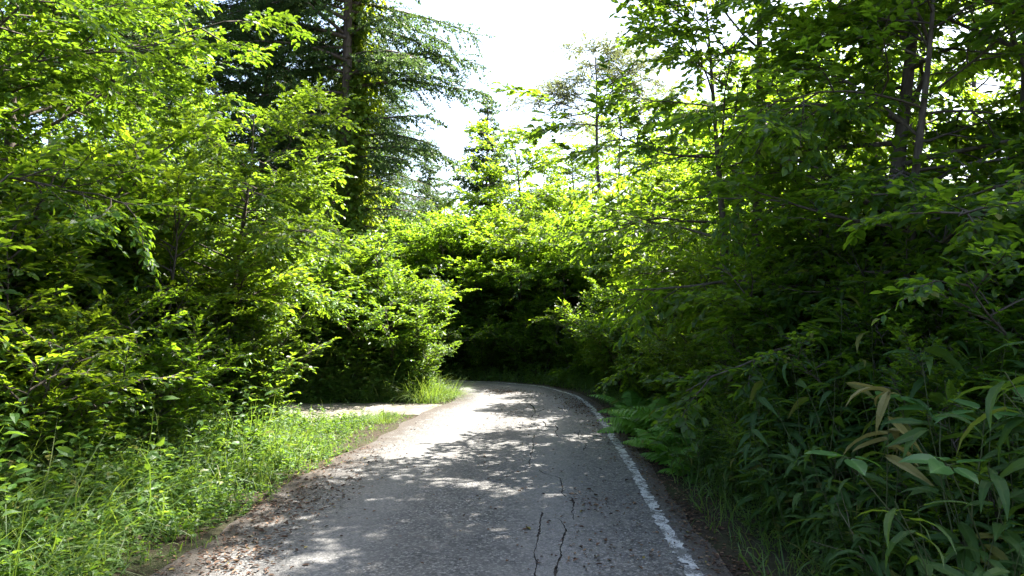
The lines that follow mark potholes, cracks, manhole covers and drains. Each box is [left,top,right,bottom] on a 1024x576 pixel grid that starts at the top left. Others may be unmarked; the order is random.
crack [529,404,575,576]
